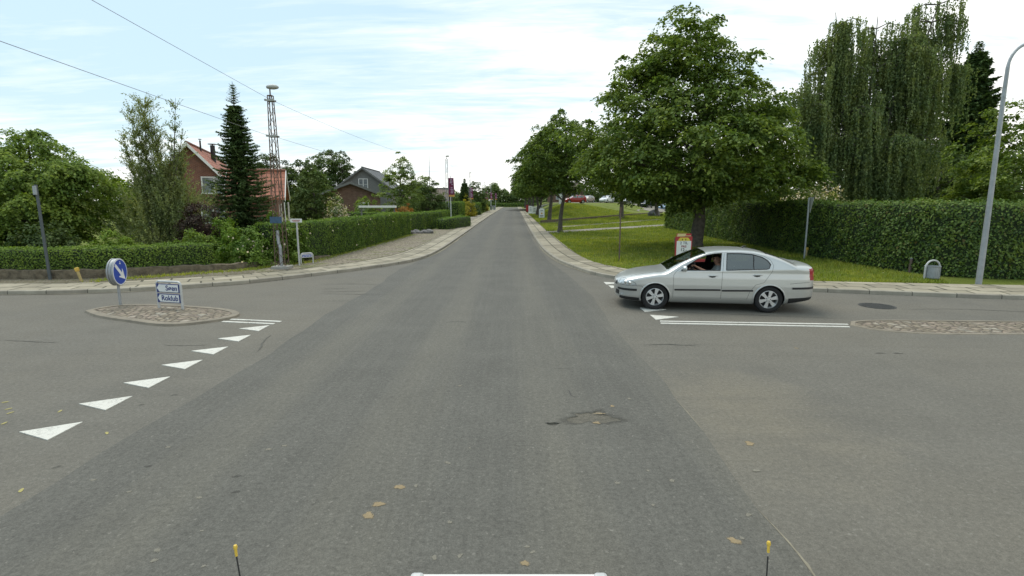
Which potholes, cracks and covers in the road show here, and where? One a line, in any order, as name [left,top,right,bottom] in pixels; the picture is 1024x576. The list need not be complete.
pothole [567,411,621,423]
